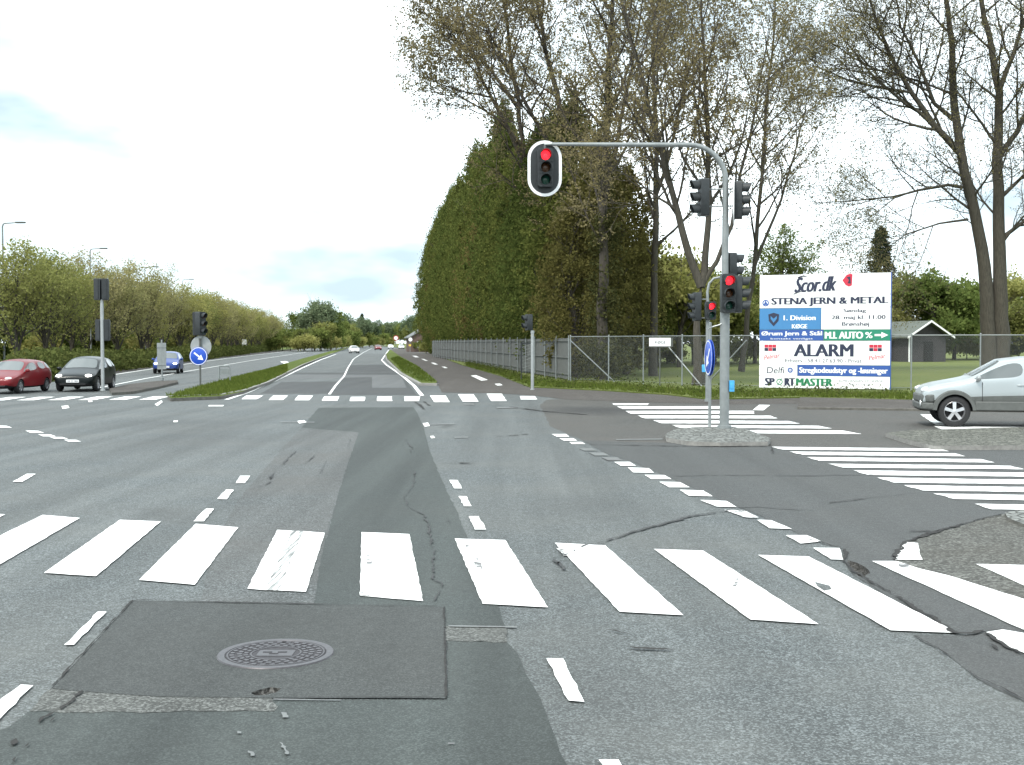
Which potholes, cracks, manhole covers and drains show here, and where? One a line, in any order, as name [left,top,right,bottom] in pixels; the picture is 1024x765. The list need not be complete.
crack [404,443,450,600]
manhole cover [217,639,334,669]
pothole [252,687,281,695]
crack [808,538,1024,699]
crack [892,515,997,559]
pothole [848,560,870,577]
crack [553,506,790,569]
